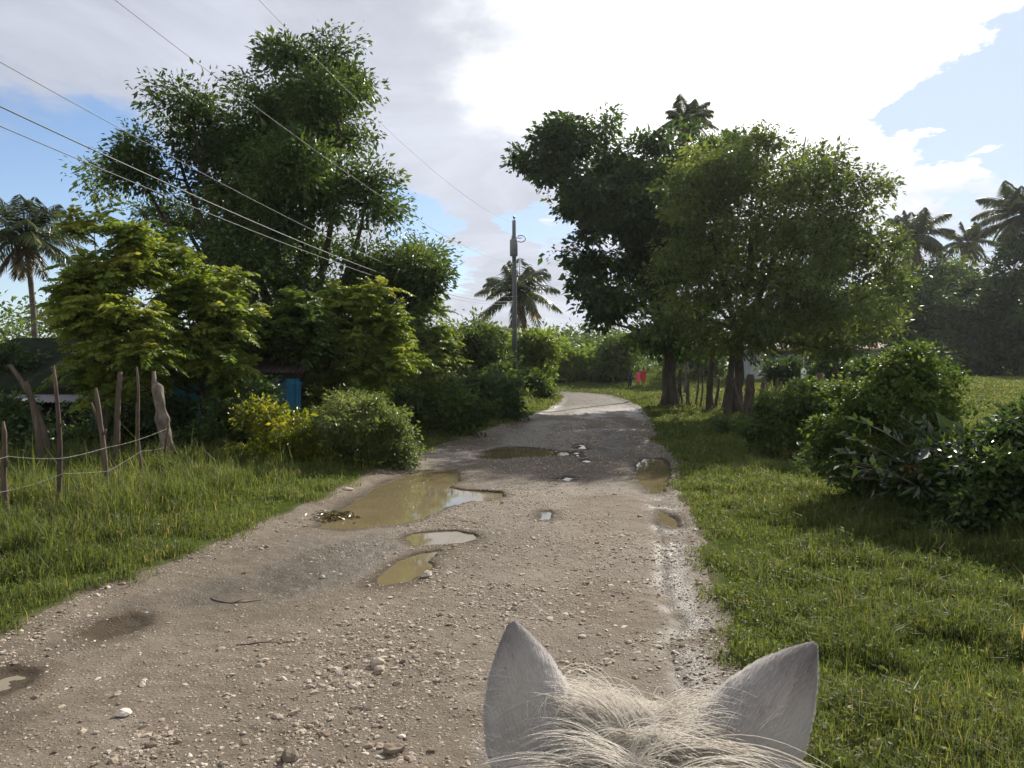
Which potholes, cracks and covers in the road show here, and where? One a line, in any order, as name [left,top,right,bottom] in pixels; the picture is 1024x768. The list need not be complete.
pothole [535,509,558,520]
pothole [479,446,557,459]
pothole [633,457,674,494]
pothole [312,469,510,529]
pothole [402,529,484,547]
pothole [368,548,448,587]
pothole [655,509,686,528]
pothole [0,661,51,699]
